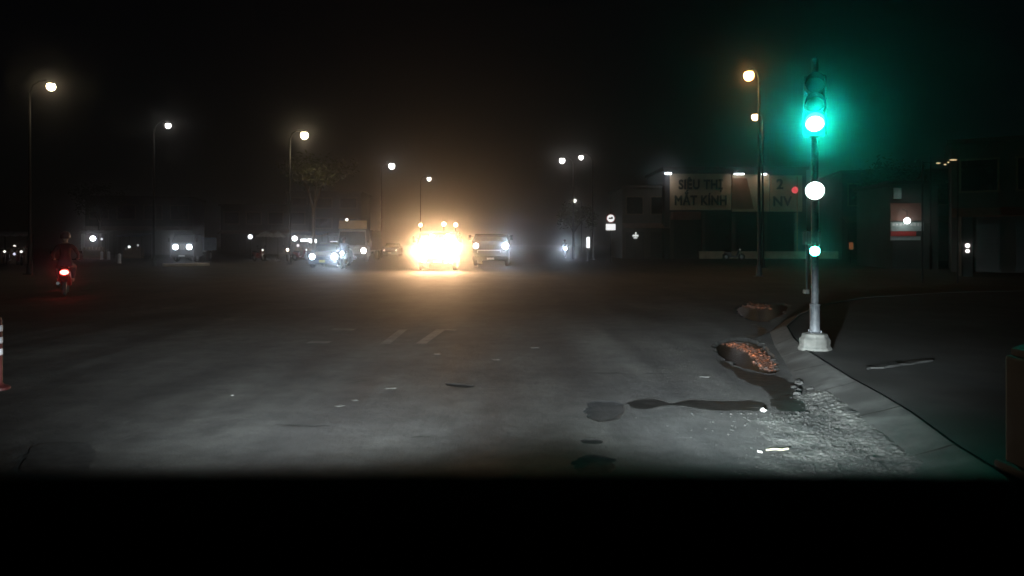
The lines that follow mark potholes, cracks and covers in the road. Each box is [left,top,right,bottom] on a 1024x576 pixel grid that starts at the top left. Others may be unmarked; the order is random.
pothole [711,338,780,373]
pothole [570,455,617,472]
pothole [583,400,626,422]
pothole [733,302,792,322]
